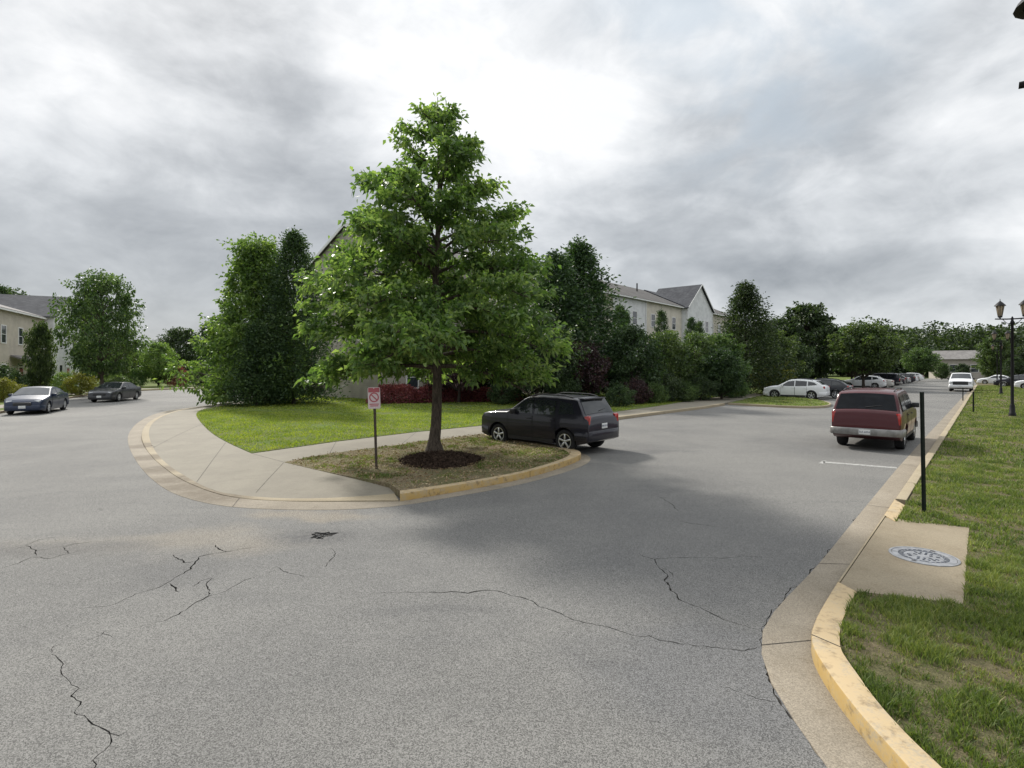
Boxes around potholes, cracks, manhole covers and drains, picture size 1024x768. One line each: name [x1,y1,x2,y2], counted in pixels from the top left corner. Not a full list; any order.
manhole cover [888,546,961,567]
crack [89,545,256,625]
crack [10,537,87,566]
crack [383,518,856,720]
crack [24,631,122,768]
